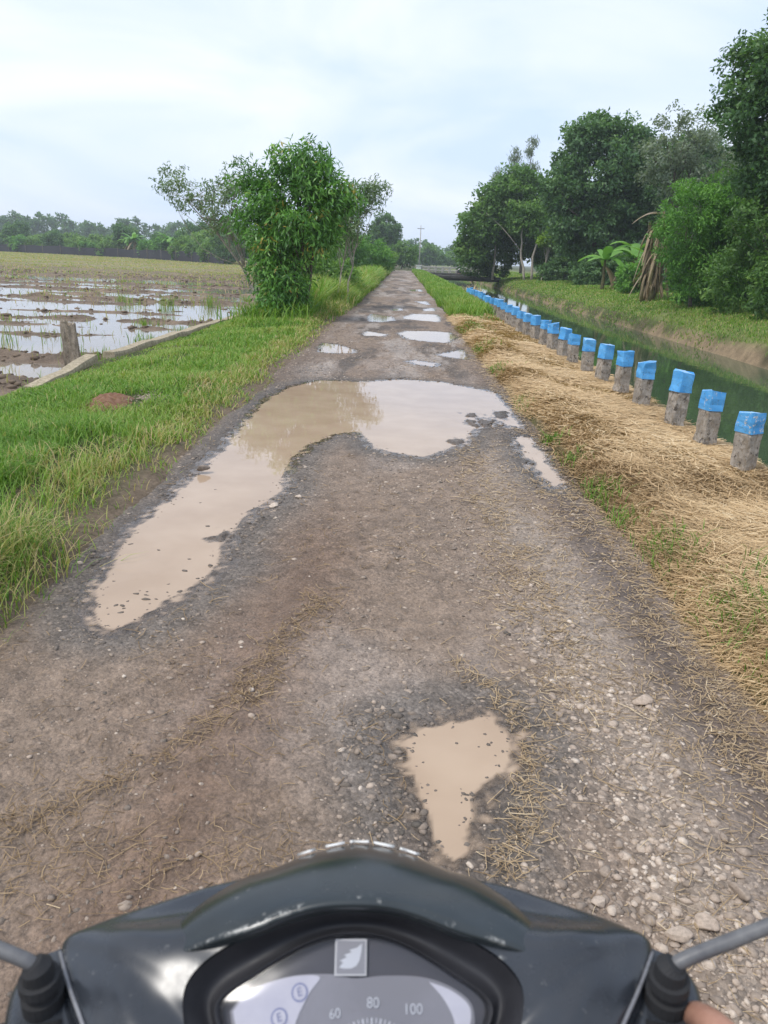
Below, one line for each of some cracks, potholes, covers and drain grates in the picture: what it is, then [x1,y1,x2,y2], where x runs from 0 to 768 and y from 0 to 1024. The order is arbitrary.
pothole [70,379,367,639]
pothole [396,330,460,343]
pothole [402,359,442,367]
pothole [315,342,358,354]
pothole [377,698,543,881]
pothole [505,434,577,491]
pothole [402,314,441,322]
pothole [353,378,529,460]
pothole [433,349,472,360]
